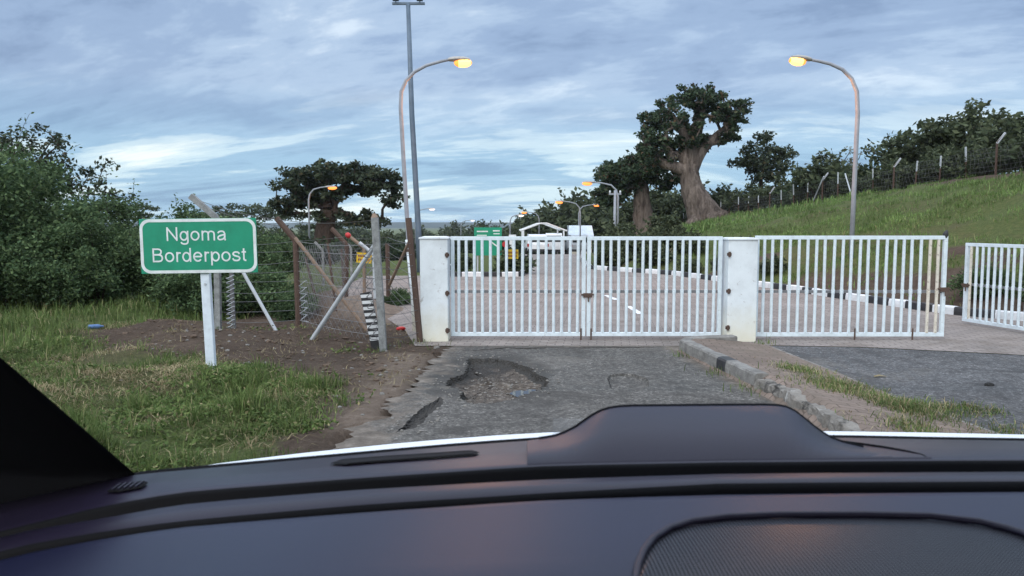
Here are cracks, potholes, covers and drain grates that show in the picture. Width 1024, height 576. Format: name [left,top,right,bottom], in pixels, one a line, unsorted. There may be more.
pothole [445,358,549,404]
pothole [397,397,444,432]
